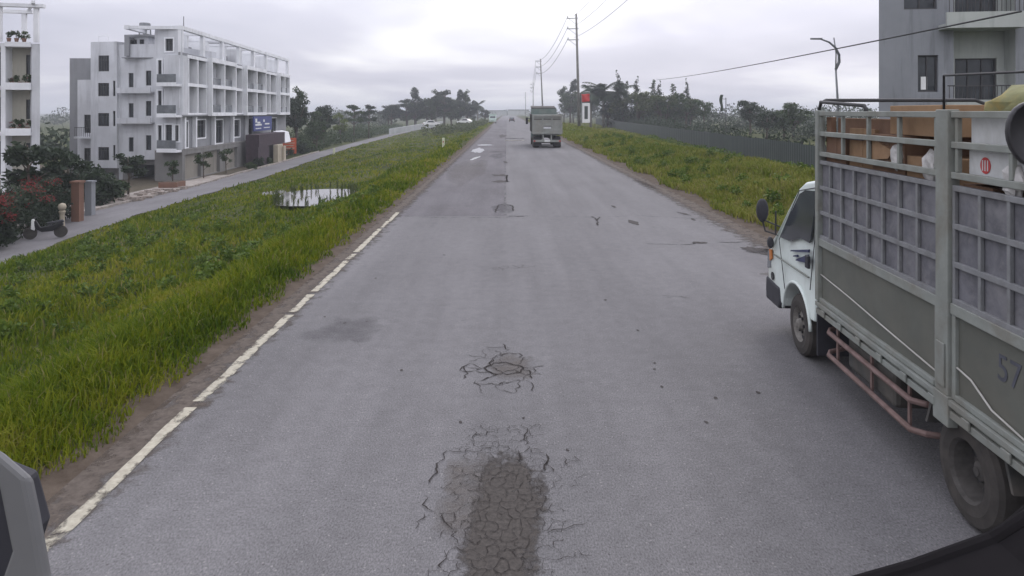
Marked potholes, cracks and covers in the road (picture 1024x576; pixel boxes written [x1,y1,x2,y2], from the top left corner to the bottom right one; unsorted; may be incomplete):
crack [416,423,592,576]
